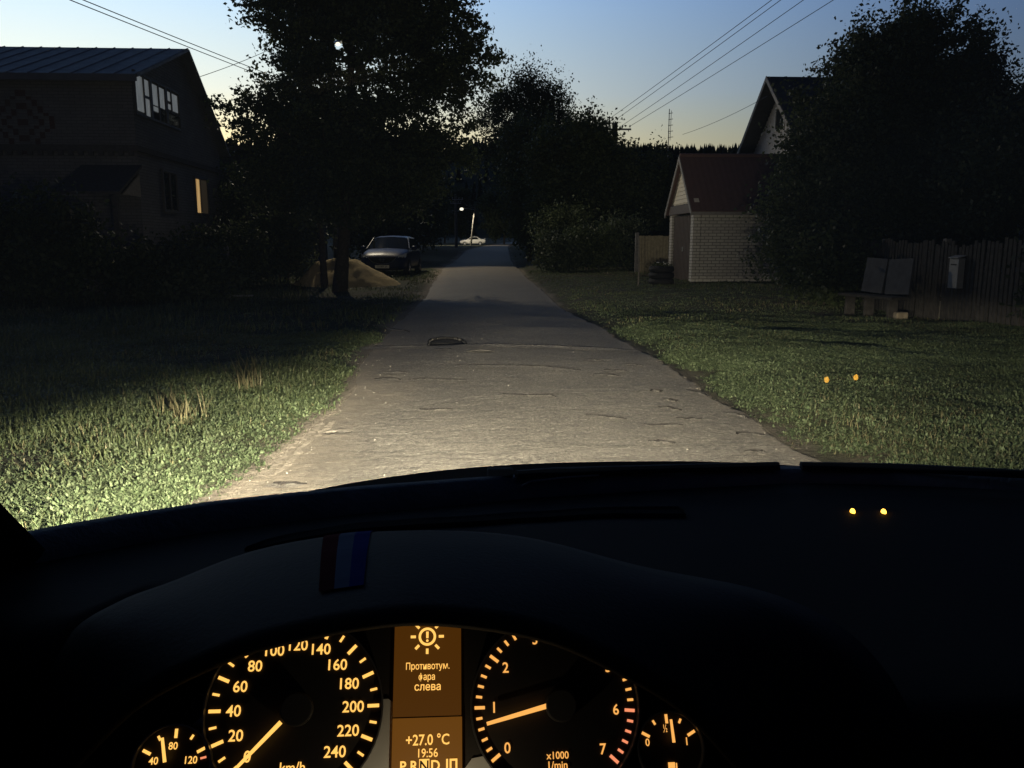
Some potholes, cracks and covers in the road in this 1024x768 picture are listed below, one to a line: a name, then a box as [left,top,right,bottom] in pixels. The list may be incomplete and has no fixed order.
crack [375,371,467,382]
crack [585,389,774,455]
crack [352,328,644,378]
